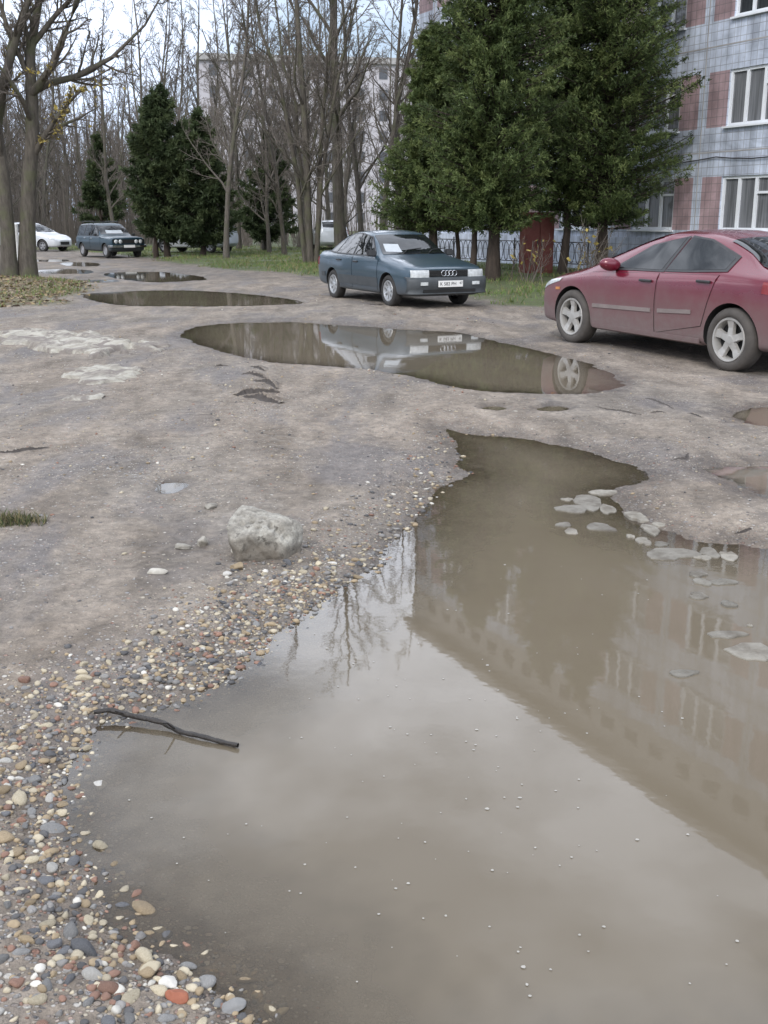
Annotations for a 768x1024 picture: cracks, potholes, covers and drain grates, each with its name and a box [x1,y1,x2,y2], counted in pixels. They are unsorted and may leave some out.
pothole [6,421,768,1024]
pothole [476,402,513,411]
pothole [92,269,216,283]
pothole [712,403,768,426]
crack [0,446,50,455]
crack [213,364,286,404]
pothole [168,317,644,395]
pothole [69,288,318,307]
pothole [529,402,576,412]
